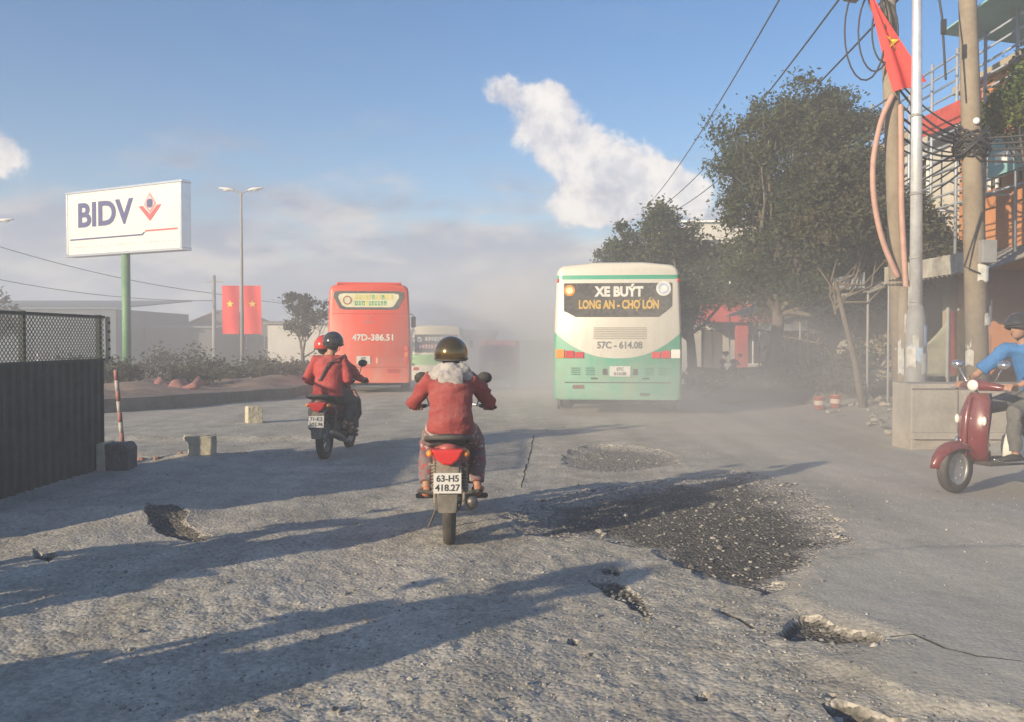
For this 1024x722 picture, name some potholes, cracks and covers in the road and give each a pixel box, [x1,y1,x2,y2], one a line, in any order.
crack [521,435,535,487]
pothole [560,444,682,473]
pothole [585,578,655,621]
pothole [143,503,213,542]
crack [891,634,1020,661]
pothole [821,698,909,722]
pothole [500,469,856,597]
pothole [32,548,58,562]
pothole [776,614,884,644]
crack [719,611,755,629]
